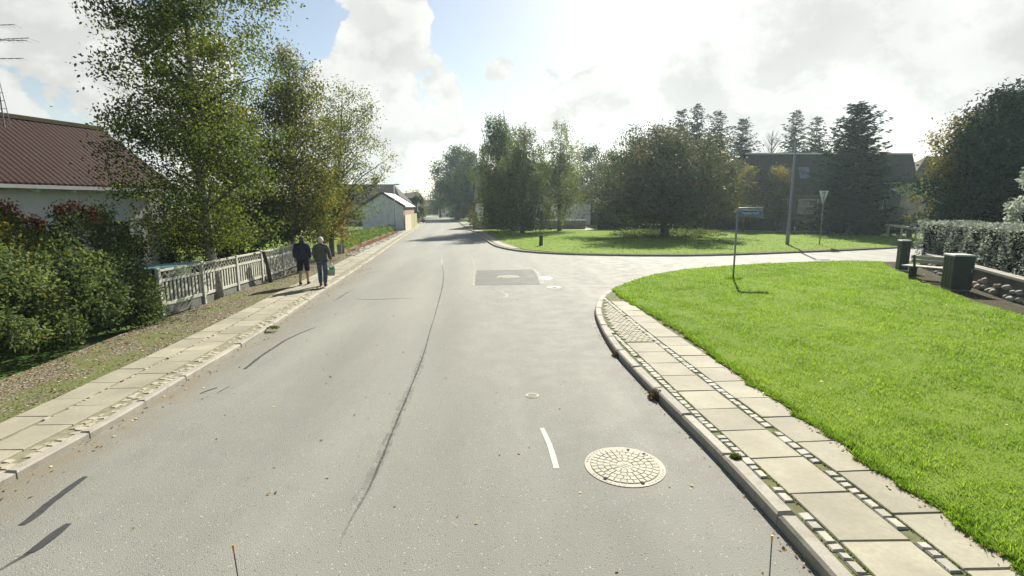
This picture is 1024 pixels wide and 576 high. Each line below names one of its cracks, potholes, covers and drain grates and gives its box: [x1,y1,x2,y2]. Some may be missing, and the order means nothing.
manhole cover [585,447,666,488]
